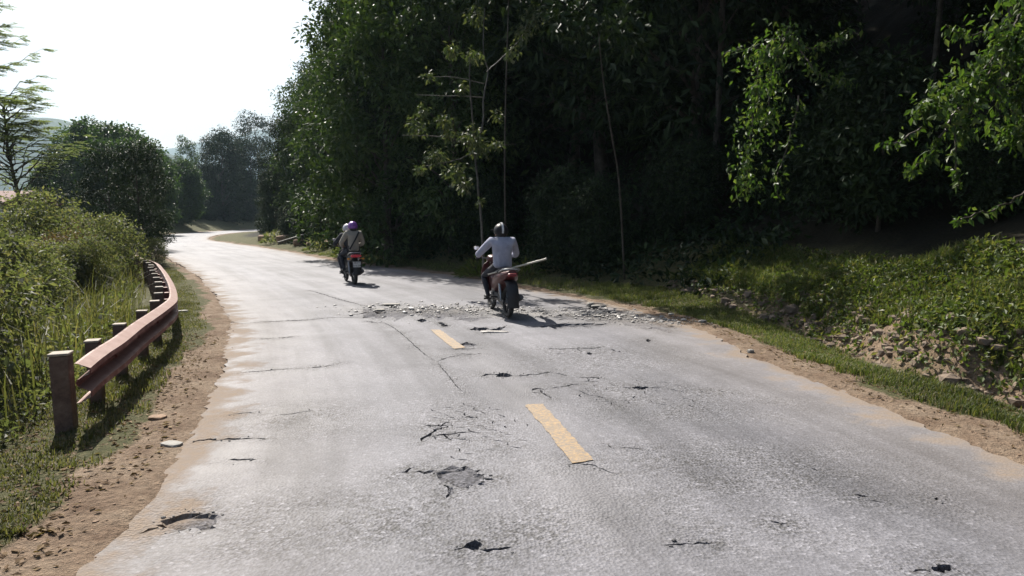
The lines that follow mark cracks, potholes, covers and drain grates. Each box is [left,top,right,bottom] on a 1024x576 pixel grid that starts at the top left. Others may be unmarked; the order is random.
pothole [353,306,496,322]
pothole [402,465,494,498]
crack [420,403,528,460]
crack [192,438,262,461]
pothole [913,564,957,573]
pothole [137,512,221,534]
pothole [454,540,511,552]
